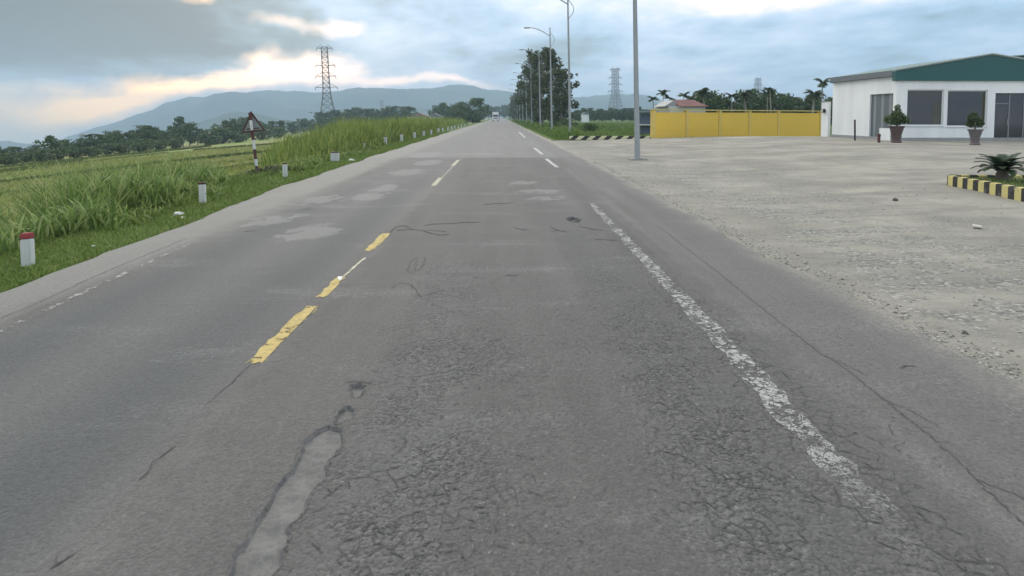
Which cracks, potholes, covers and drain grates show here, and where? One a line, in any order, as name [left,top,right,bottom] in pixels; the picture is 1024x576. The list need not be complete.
crack [50,550,79,569]
crack [388,202,514,235]
pothole [347,384,369,399]
crack [545,209,1010,576]
crack [288,262,580,576]
